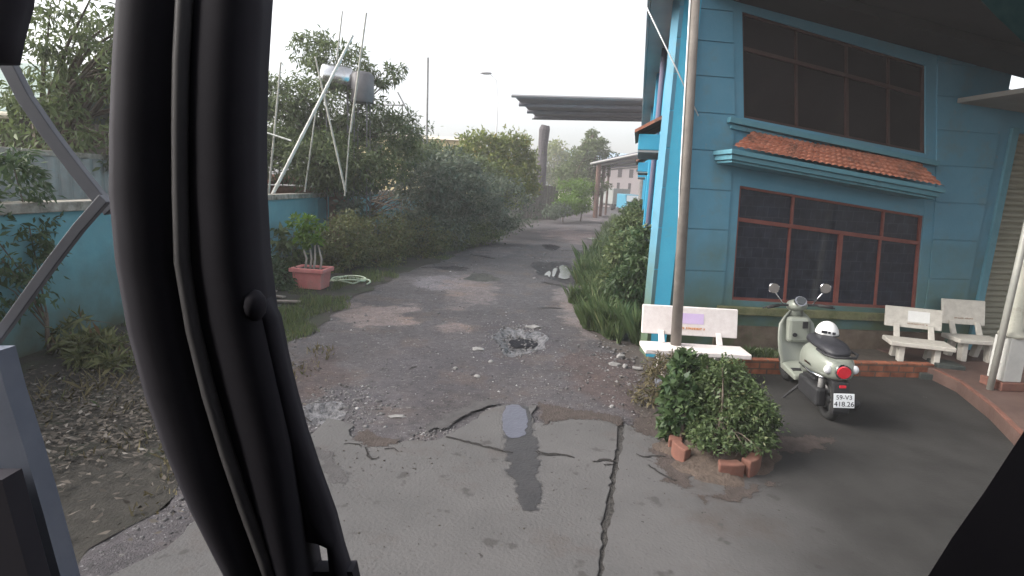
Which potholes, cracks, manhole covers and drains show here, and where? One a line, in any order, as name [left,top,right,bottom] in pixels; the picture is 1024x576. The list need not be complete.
pothole [491,327,549,357]
crack [345,443,399,459]
pothole [530,261,576,285]
crack [536,450,575,458]
crack [446,436,513,453]
